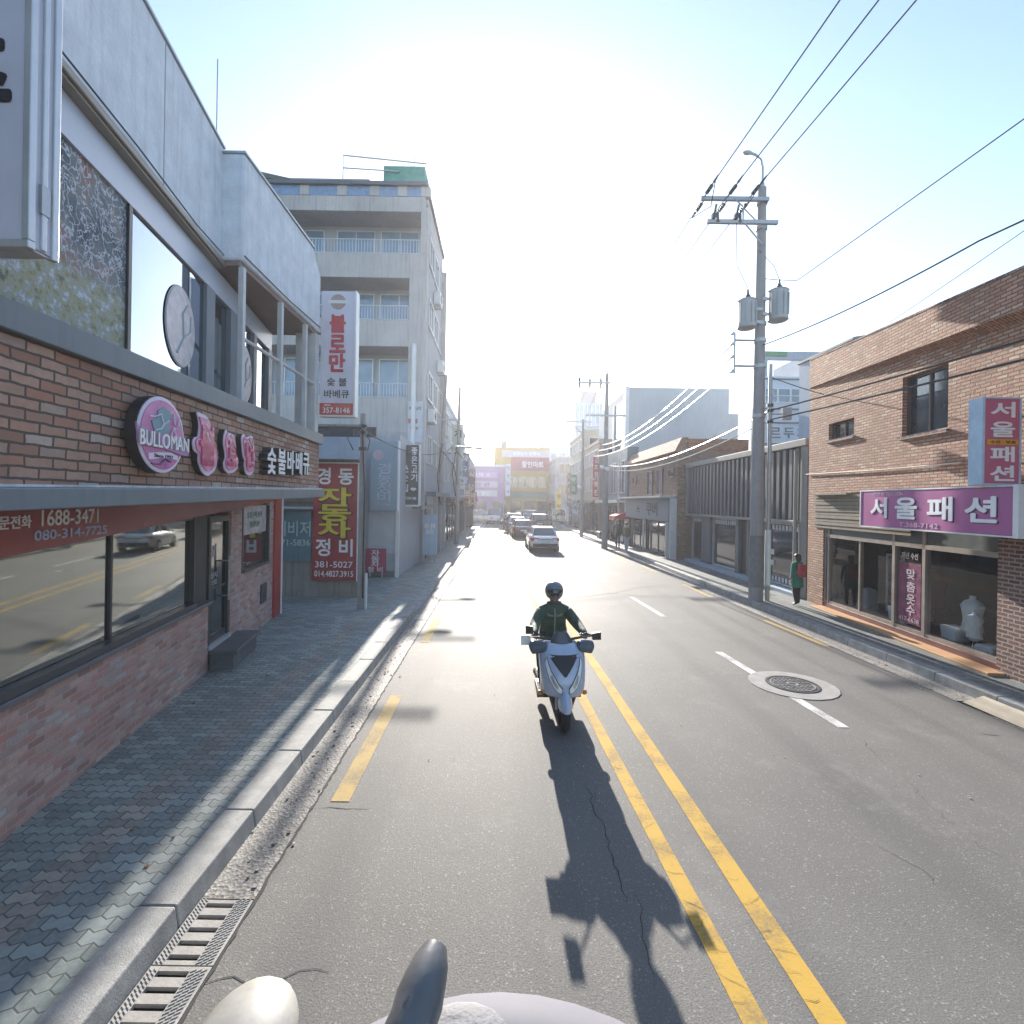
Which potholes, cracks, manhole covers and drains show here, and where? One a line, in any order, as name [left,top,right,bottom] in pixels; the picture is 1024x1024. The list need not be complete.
drain grate [108,966,212,1024]
crack [587,789,655,983]
drain grate [152,899,253,967]
manhole cover [748,671,841,700]
